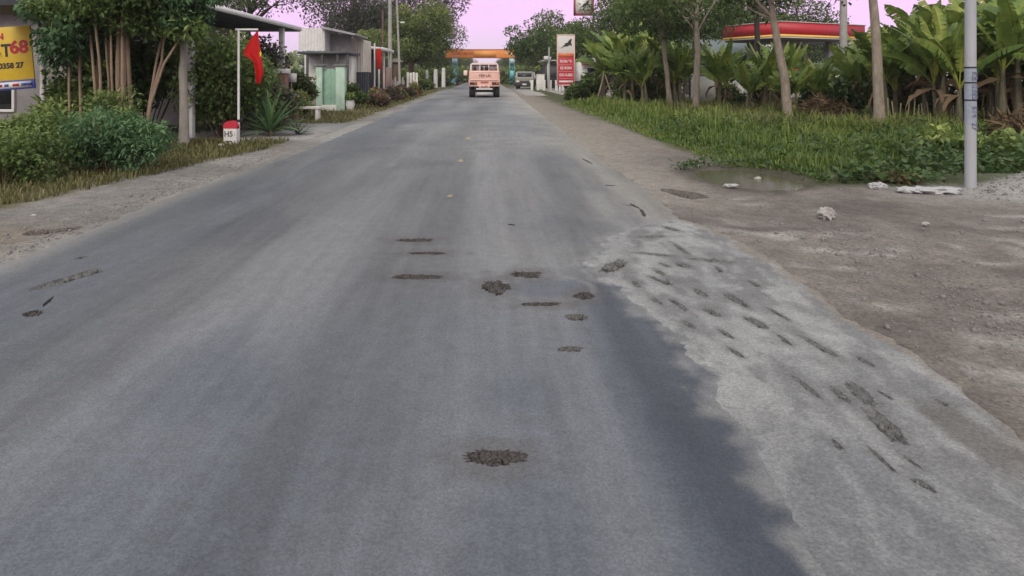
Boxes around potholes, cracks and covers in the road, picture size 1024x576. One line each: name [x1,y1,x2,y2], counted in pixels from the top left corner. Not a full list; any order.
pothole [598,259,629,274]
pothole [25,268,106,292]
pothole [860,407,910,445]
pothole [462,449,529,467]
pothole [573,292,595,300]
pothole [659,188,710,200]
pothole [829,385,851,404]
pothole [565,313,588,321]
pothole [481,280,511,296]
pothole [844,381,878,407]
